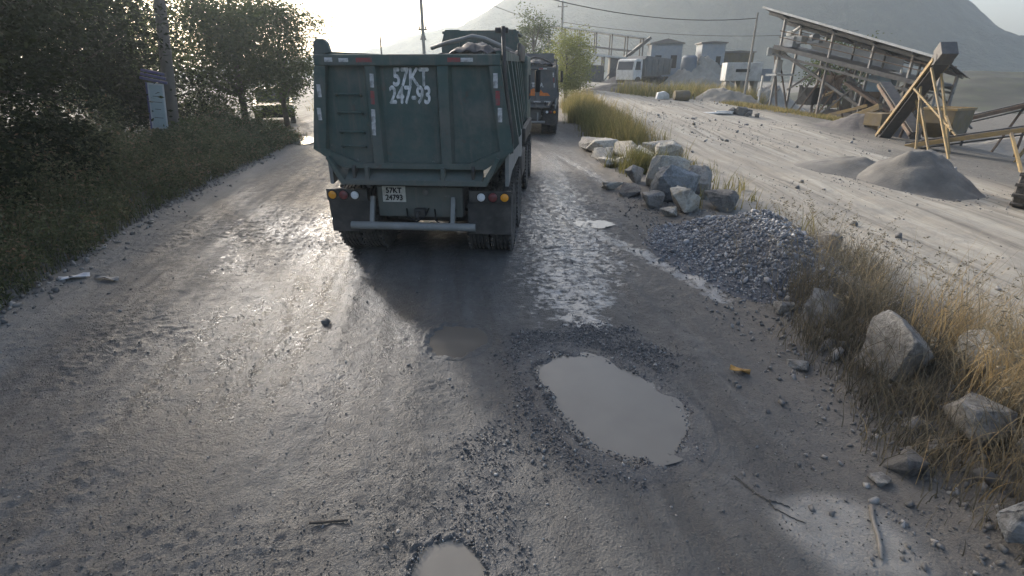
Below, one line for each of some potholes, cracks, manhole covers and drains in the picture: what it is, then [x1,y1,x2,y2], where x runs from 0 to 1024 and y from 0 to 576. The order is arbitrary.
pothole [516,341,720,484]
pothole [421,320,492,361]
pothole [396,530,497,576]
